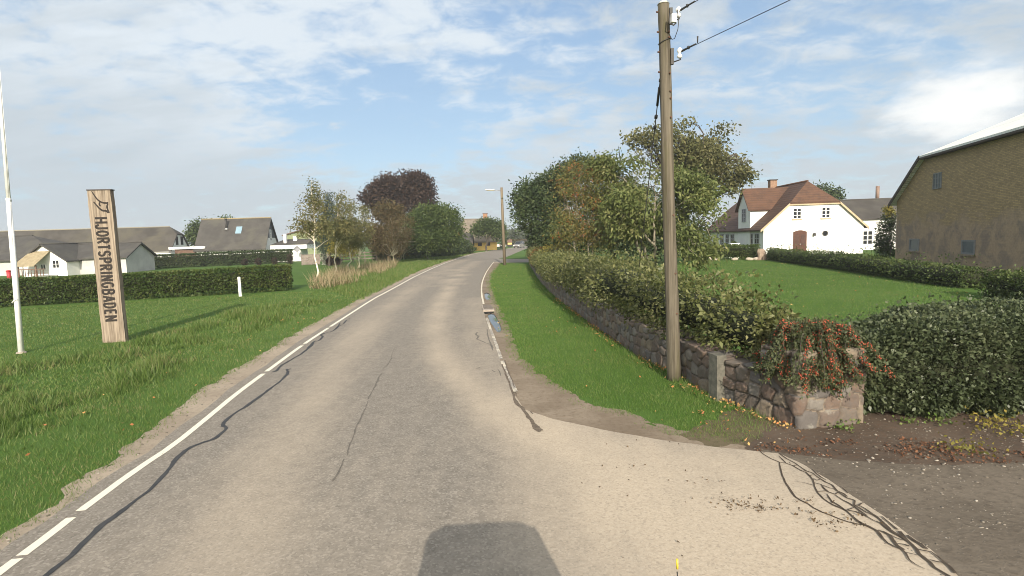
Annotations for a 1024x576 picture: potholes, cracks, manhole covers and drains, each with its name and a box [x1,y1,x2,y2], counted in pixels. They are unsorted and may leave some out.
crack [332,354,392,480]
crack [760,451,958,576]
